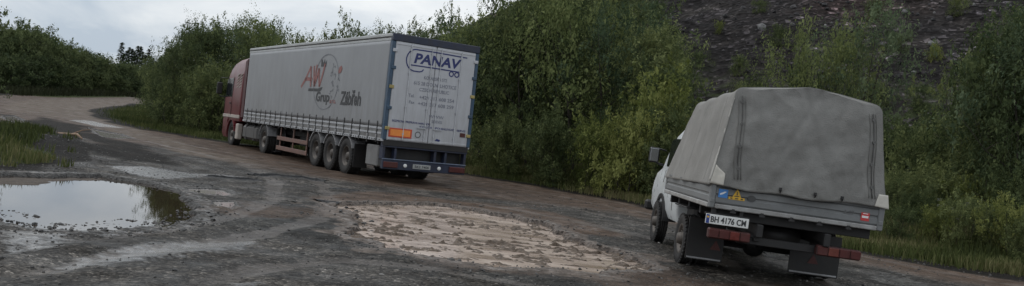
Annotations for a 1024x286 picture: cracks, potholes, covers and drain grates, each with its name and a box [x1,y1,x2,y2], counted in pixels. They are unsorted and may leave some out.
pothole [208,200,244,210]
pothole [180,187,242,197]
pothole [0,170,220,234]
